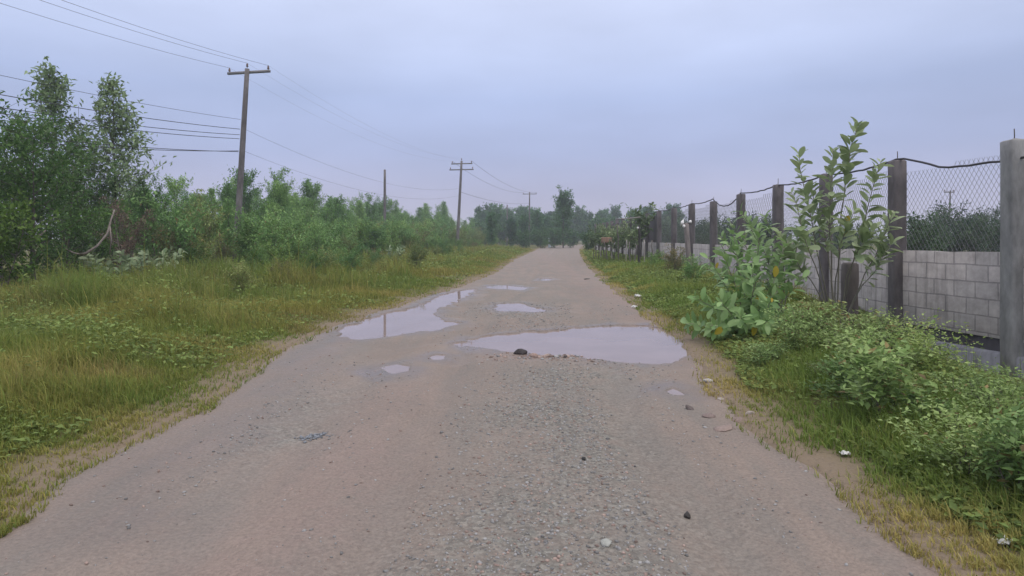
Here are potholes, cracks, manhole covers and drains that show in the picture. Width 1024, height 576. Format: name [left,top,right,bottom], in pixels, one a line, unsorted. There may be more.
pothole [380,364,413,374]
pothole [336,289,479,340]
pothole [490,302,549,312]
pothole [449,325,687,364]
